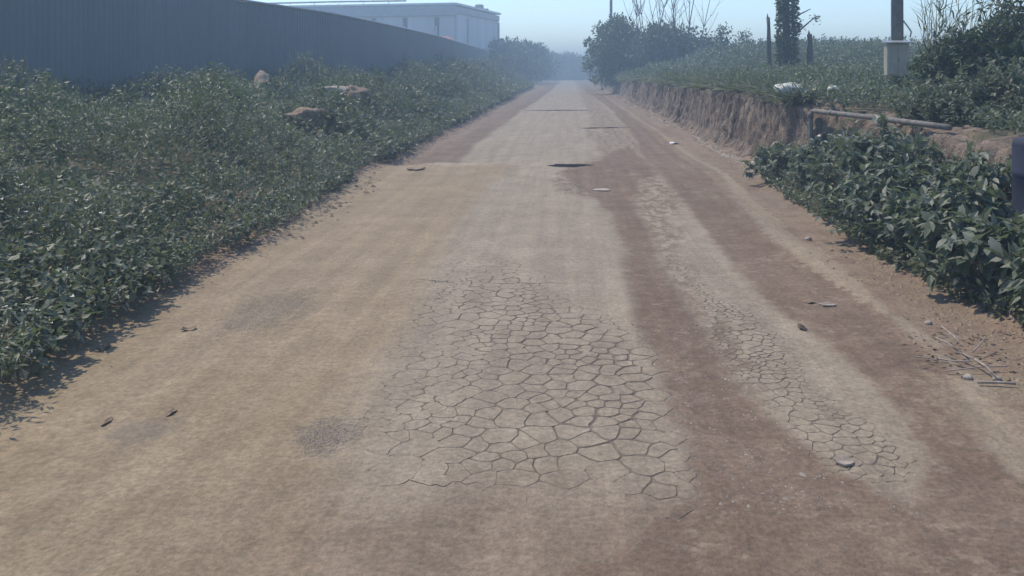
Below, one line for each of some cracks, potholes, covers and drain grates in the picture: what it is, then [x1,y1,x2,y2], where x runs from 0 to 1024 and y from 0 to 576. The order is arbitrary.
crack [345,255,719,538]
crack [663,253,925,490]
